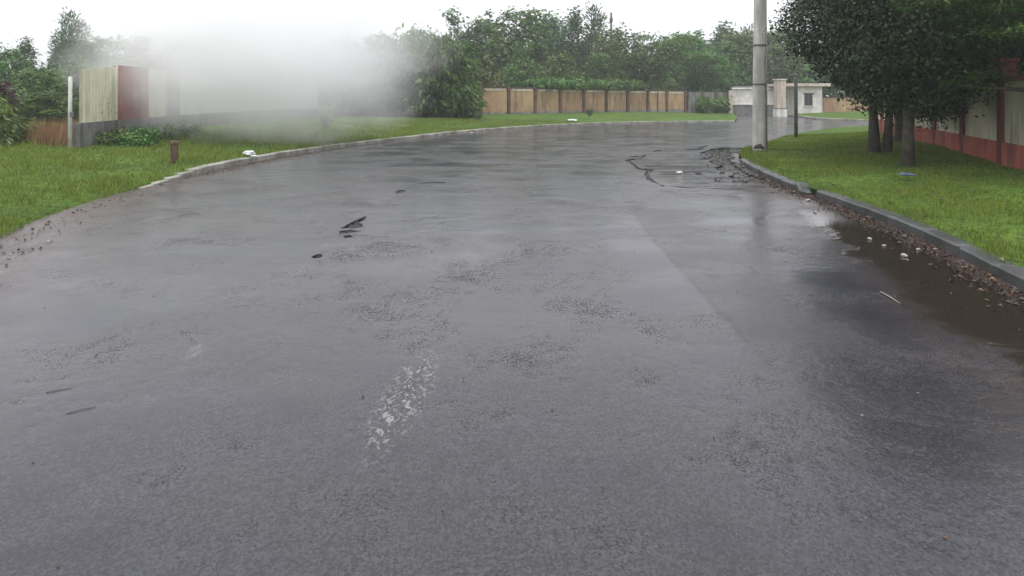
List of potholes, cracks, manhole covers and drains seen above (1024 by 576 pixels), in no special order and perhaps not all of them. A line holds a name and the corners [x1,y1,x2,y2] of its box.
pothole [700,148,767,182]
pothole [339,216,367,238]
crack [625,150,756,190]
